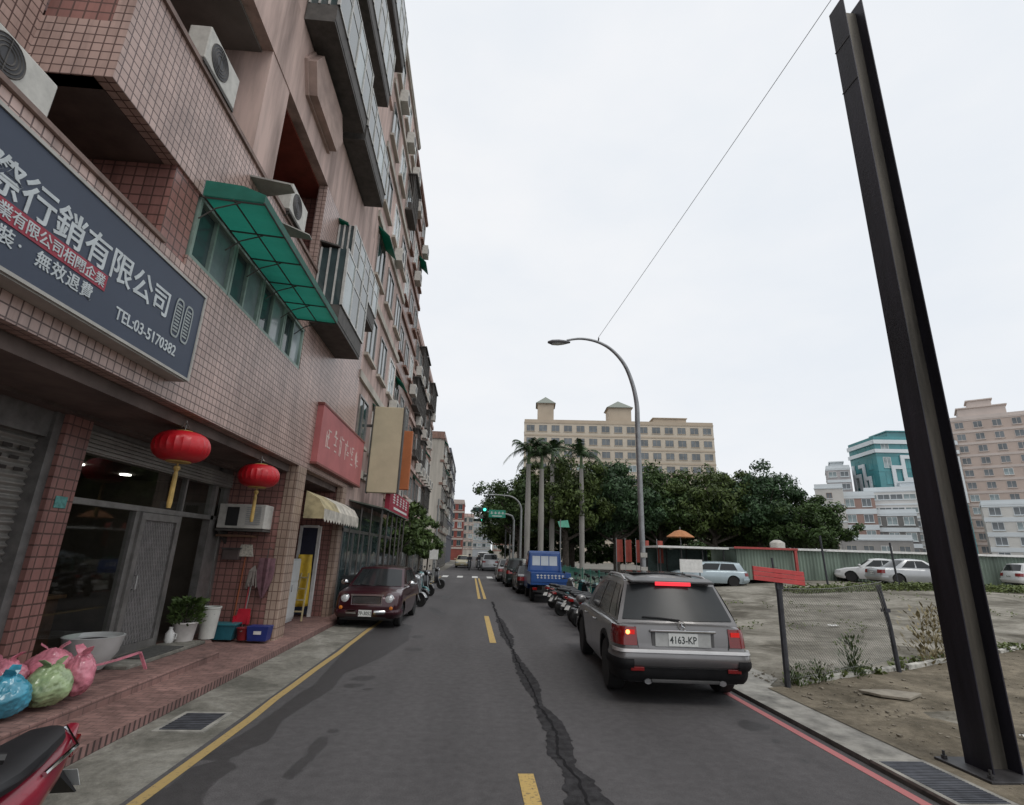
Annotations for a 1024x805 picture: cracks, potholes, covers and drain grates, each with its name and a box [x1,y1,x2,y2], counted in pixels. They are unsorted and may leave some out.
drain grate [870,759,1019,805]
drain grate [150,711,233,733]
